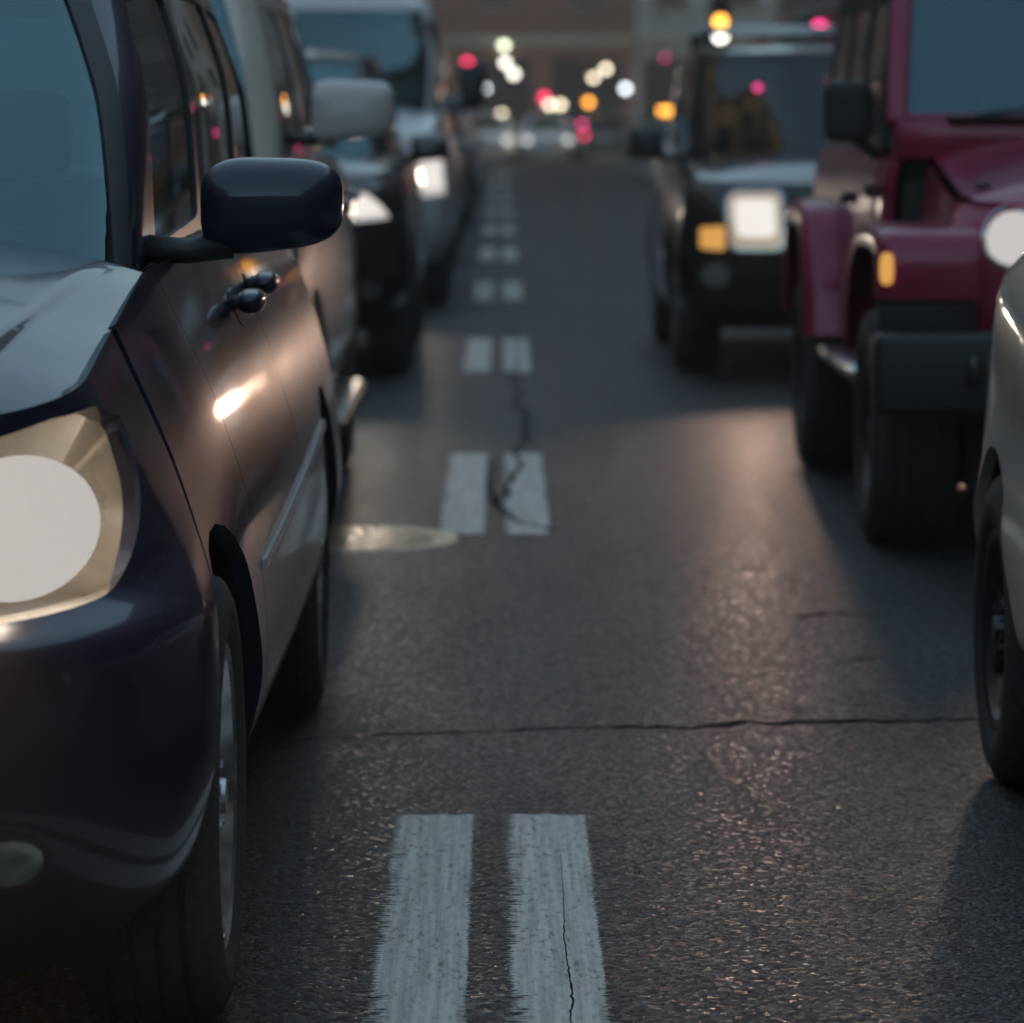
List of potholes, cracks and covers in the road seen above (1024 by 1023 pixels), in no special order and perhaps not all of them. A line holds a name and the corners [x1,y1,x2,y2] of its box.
crack [246,718,978,747]
crack [485,320,557,534]
crack [560,859,574,1023]
manhole cover [329,526,459,552]
